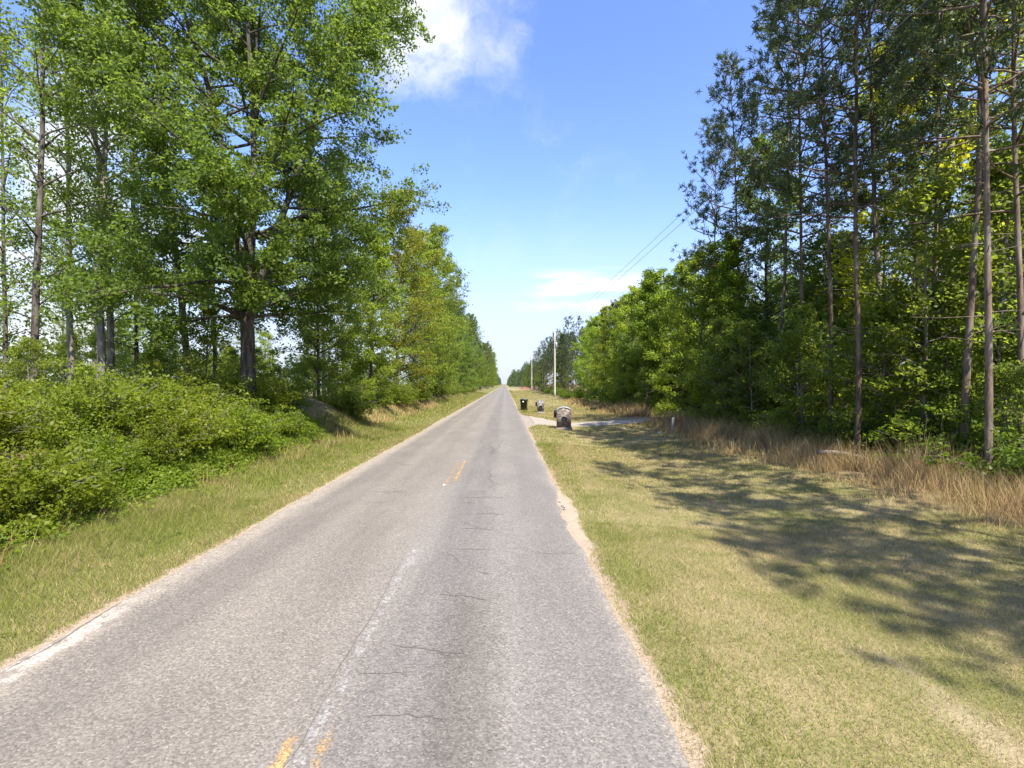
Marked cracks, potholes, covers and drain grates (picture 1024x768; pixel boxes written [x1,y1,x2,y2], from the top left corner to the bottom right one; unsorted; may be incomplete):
crack [369,644,468,739]
crack [462,439,502,529]
